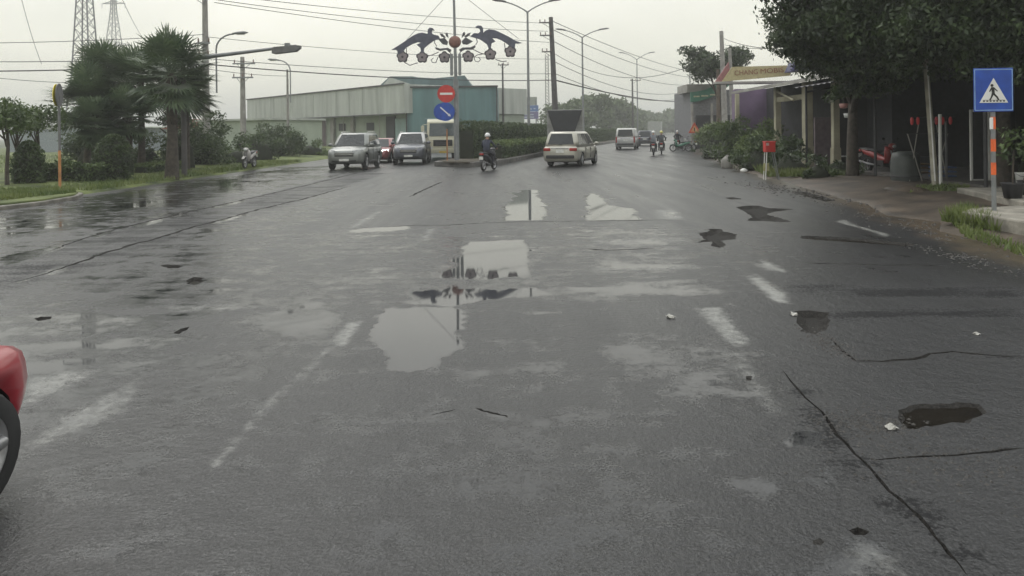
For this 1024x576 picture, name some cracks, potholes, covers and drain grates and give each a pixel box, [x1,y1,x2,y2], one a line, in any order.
pothole [697,229,737,248]
pothole [736,206,792,222]
crack [828,337,1017,362]
pothole [898,402,987,429]
pothole [794,310,831,334]
crack [781,368,1021,575]
